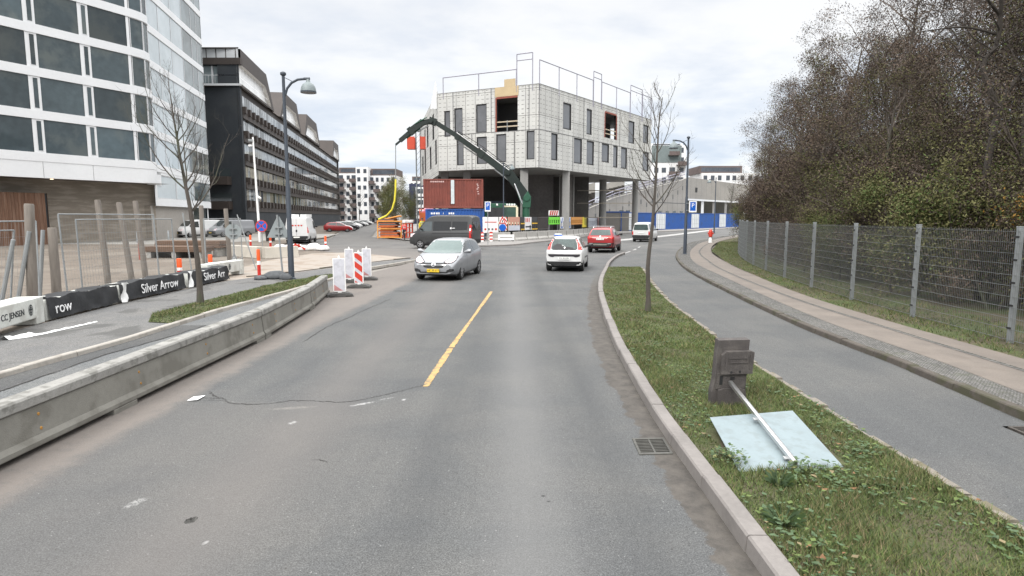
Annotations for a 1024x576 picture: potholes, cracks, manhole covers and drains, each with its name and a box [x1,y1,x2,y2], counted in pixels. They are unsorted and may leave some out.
drain grate [1007,426,1024,436]
drain grate [632,437,673,455]
crack [209,386,417,405]
